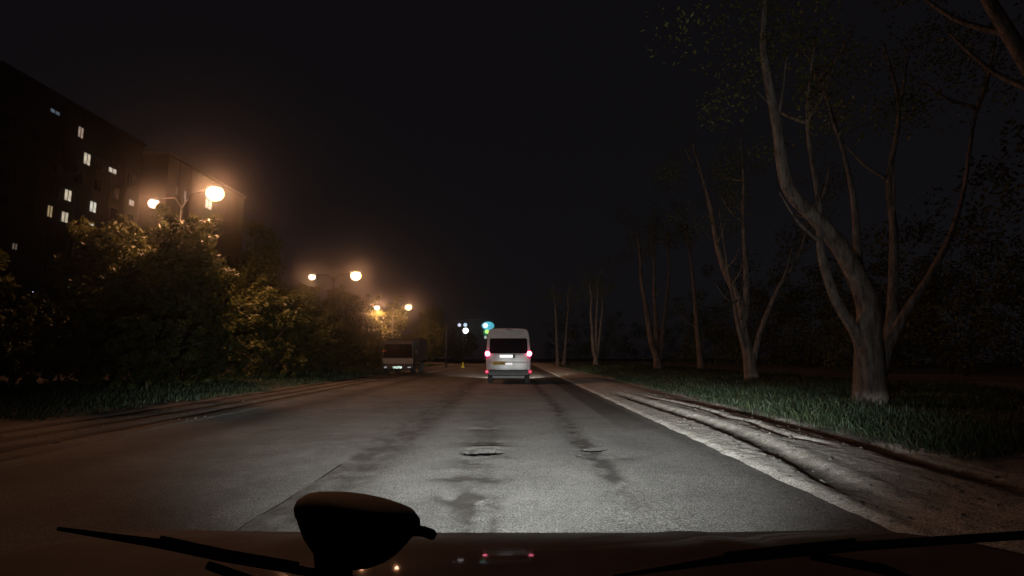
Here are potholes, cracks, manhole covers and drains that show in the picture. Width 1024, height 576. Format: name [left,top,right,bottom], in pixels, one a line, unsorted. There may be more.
pothole [460,448,506,457]
